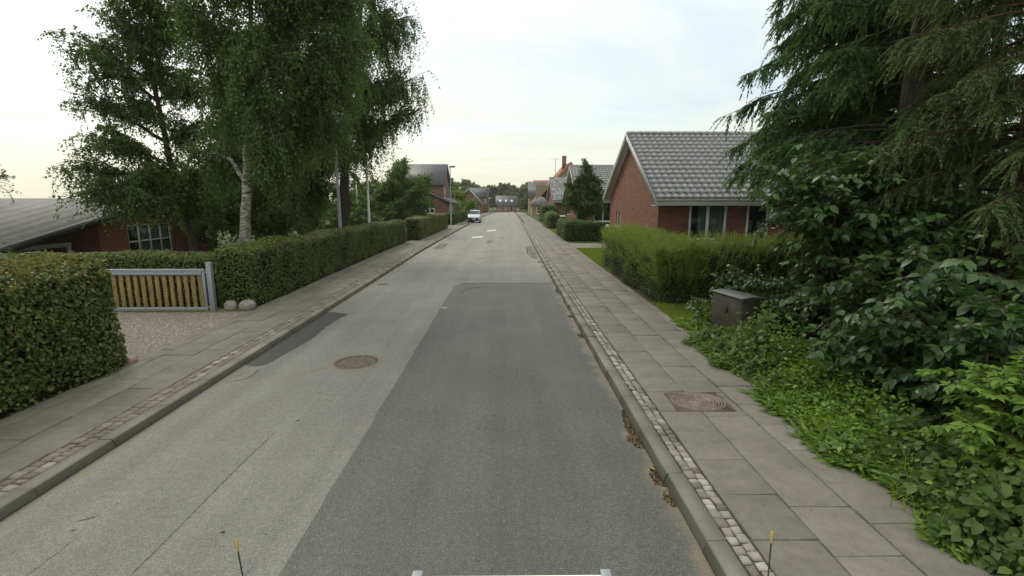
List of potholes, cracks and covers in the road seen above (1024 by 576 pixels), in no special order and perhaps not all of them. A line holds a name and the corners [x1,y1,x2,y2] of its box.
manhole cover [664,392,736,412]
manhole cover [333,355,379,369]
